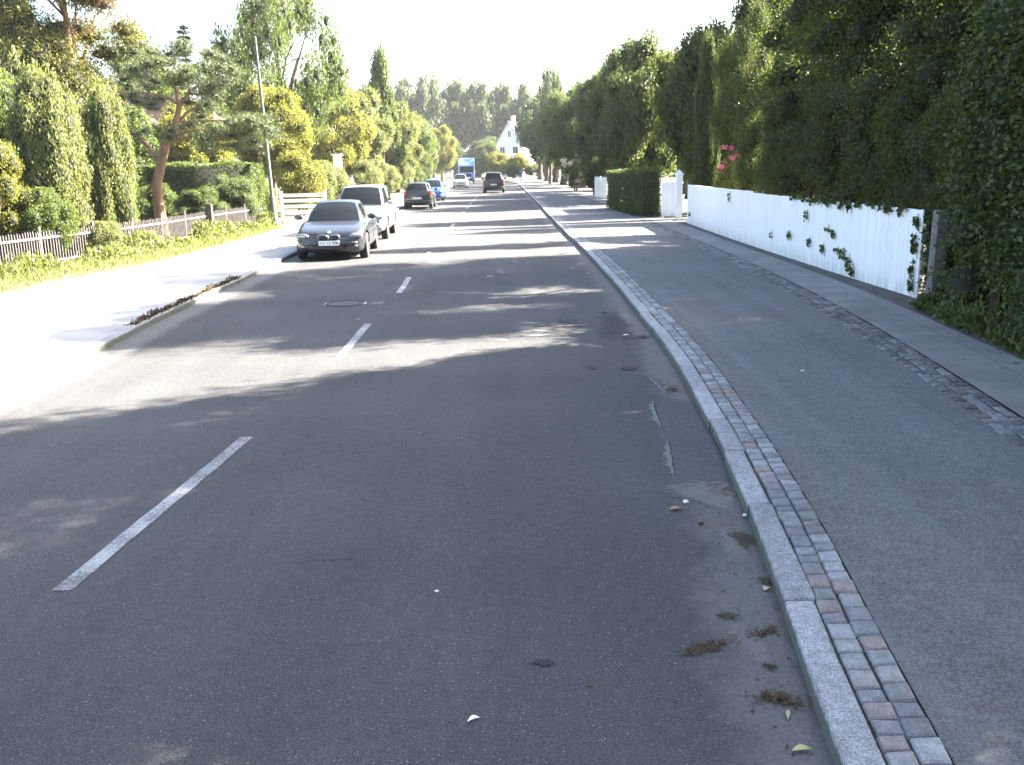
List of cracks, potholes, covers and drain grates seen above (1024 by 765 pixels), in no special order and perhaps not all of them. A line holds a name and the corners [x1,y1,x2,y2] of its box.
crack [647,377,724,499]
